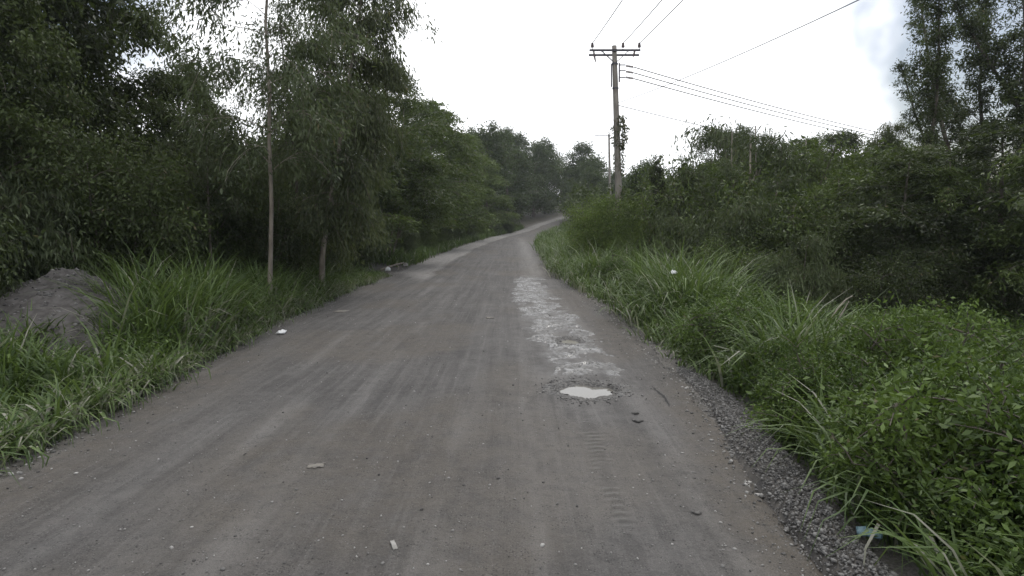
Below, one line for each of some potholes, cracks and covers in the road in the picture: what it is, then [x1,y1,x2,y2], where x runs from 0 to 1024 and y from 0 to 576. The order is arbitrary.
pothole [546,335,590,346]
pothole [523,374,643,406]
